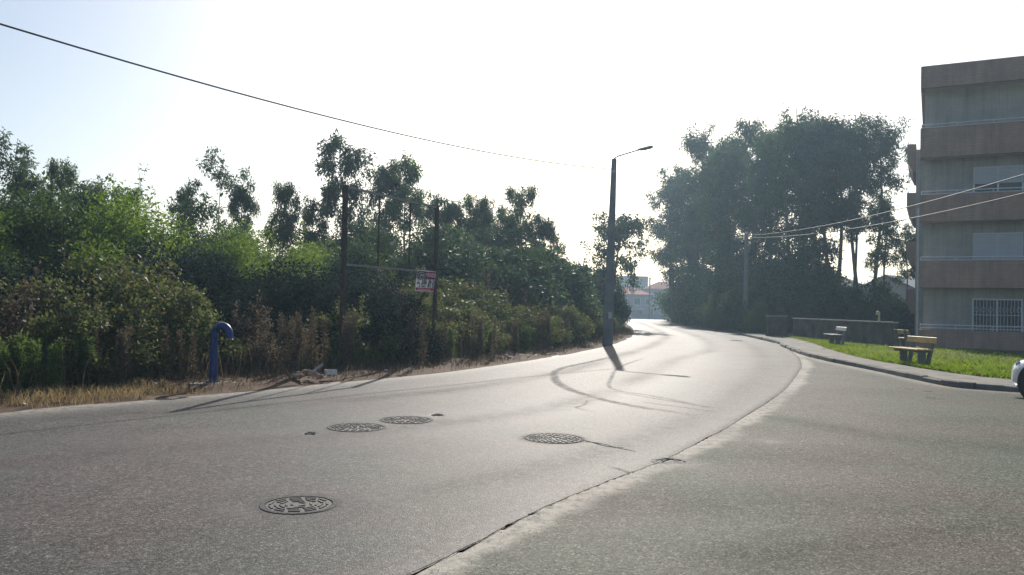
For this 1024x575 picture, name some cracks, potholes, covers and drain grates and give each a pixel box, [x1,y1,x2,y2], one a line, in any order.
manhole cover [327,423,386,432]
manhole cover [259,495,338,515]
manhole cover [380,416,433,424]
manhole cover [523,433,585,444]
